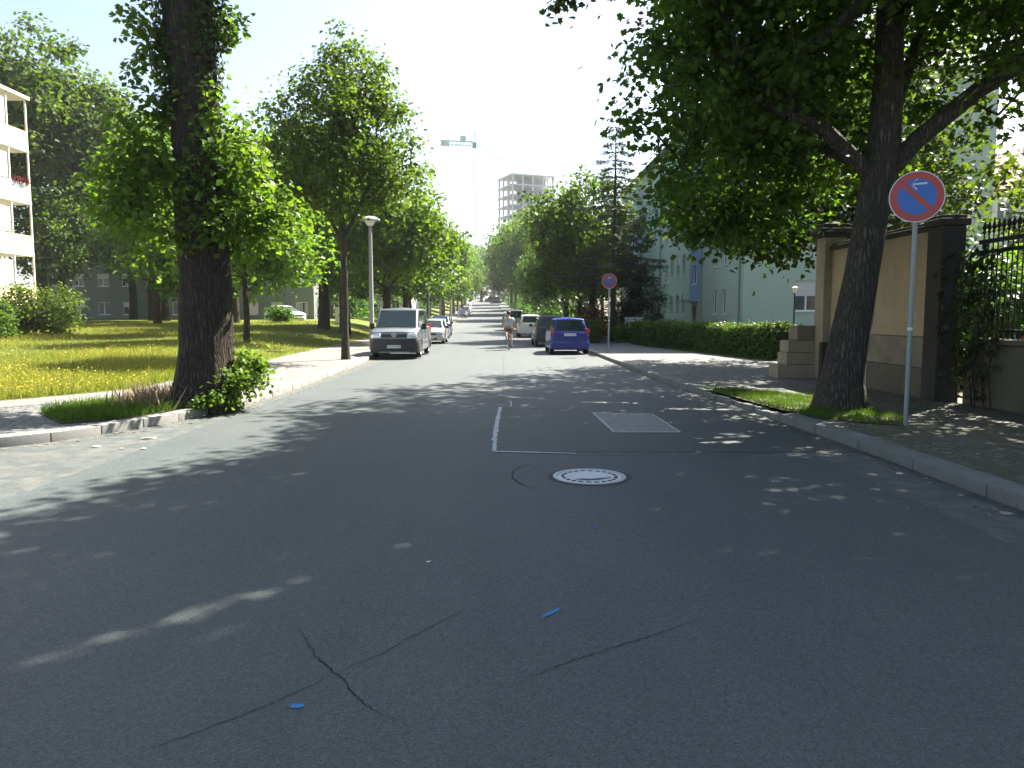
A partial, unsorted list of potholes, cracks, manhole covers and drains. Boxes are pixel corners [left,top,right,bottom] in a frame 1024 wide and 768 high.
crack [515,618,704,680]
crack [119,607,468,763]
manhole cover [548,468,632,486]
manhole cover [592,413,681,432]
